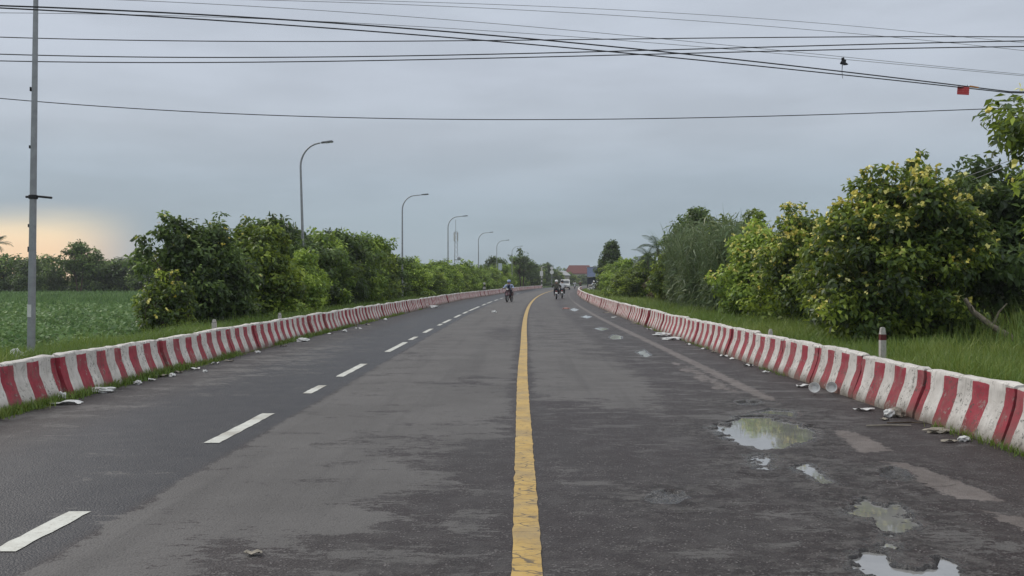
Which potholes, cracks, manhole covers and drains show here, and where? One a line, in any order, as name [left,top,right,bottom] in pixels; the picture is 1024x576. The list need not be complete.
pothole [682,413,857,453]
pothole [708,448,818,476]
